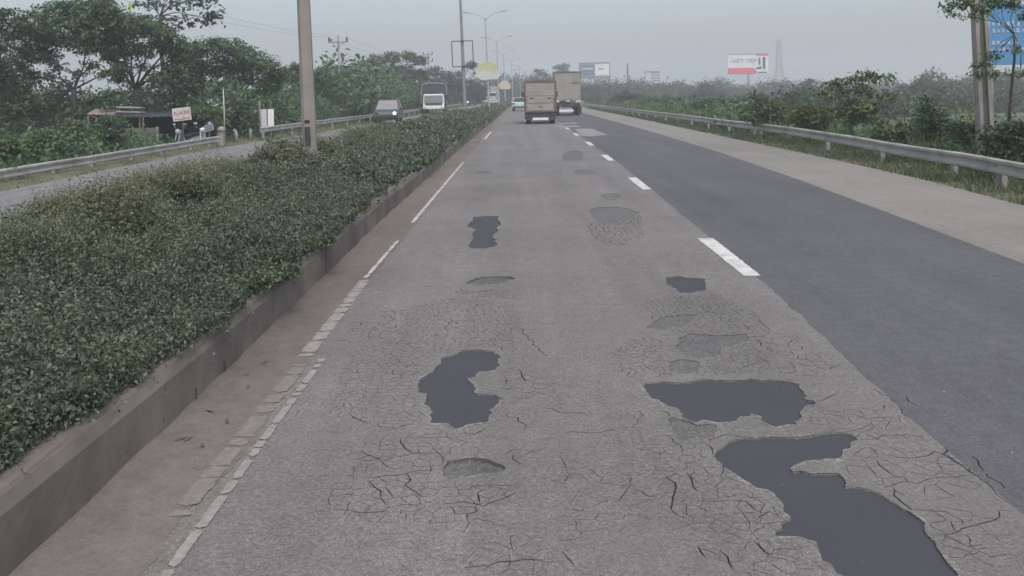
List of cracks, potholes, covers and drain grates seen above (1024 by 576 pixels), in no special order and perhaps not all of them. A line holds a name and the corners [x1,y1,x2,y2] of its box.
pothole [443,458,506,478]
pothole [639,379,818,428]
crack [328,289,827,576]
pothole [589,207,639,224]
pothole [562,151,584,161]
pothole [714,432,962,576]
crack [610,295,1021,567]
pothole [467,216,503,249]
pothole [664,276,709,297]
pothole [416,349,504,430]
